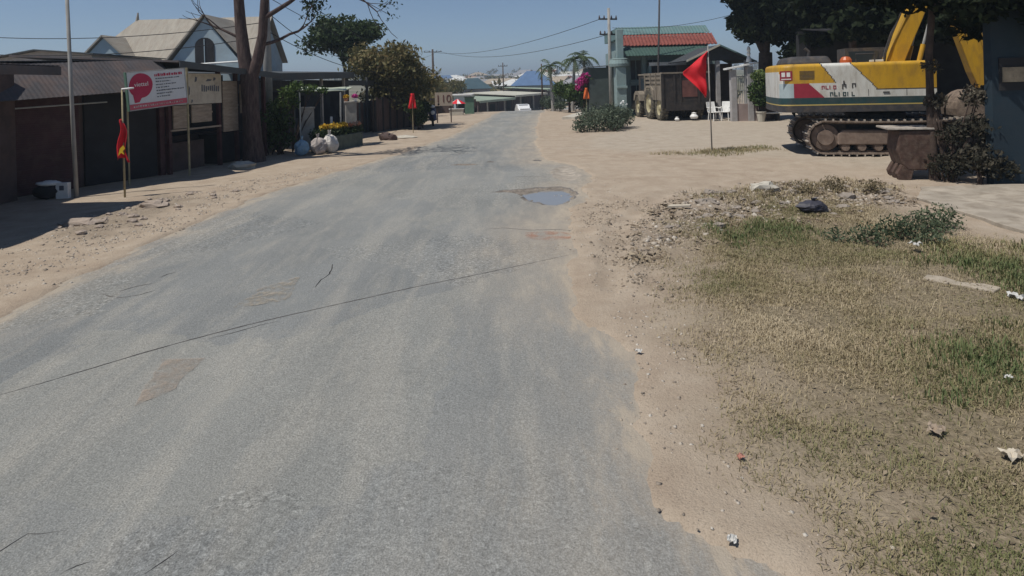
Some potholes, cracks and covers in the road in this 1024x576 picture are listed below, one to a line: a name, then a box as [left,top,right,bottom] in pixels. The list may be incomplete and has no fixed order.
pothole [496,186,579,205]
crack [1,256,562,395]
